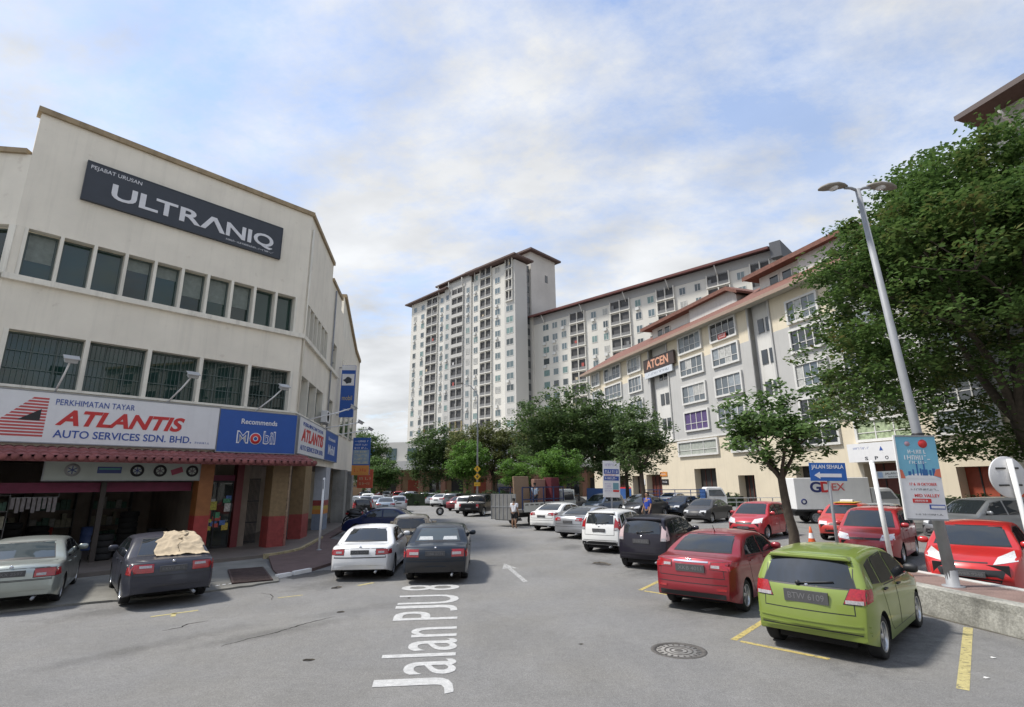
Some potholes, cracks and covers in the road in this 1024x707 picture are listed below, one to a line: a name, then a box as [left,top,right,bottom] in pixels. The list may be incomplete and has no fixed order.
drain grate [228,567,273,584]
manhole cover [651,642,708,659]
